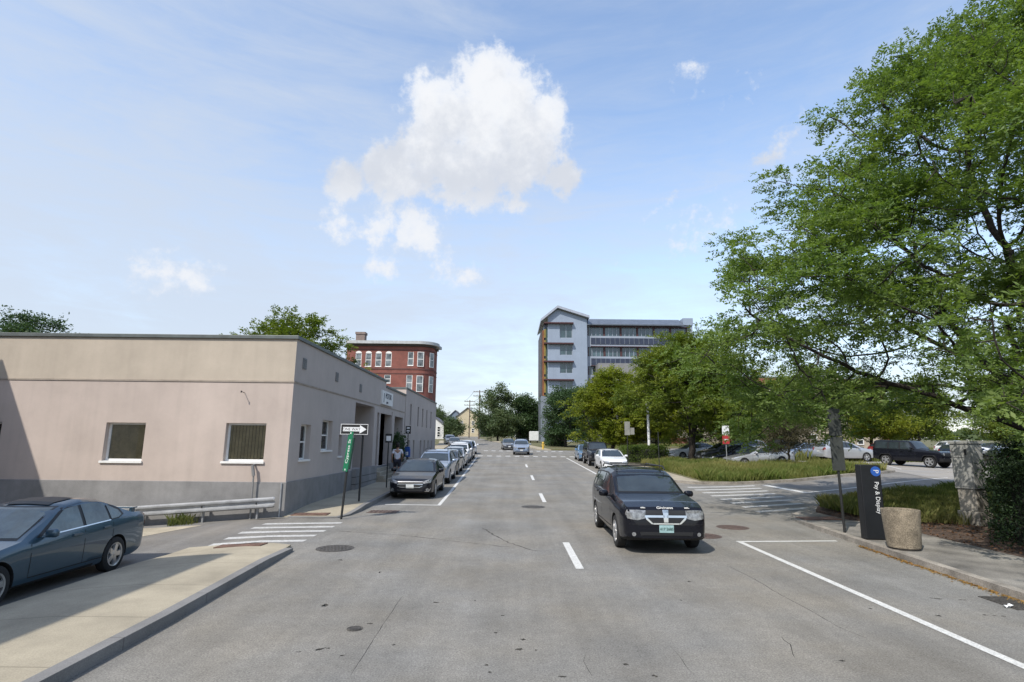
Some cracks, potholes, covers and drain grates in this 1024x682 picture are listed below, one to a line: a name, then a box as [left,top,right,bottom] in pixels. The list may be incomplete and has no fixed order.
drain grate [978,596,1024,610]
crack [345,529,536,551]
